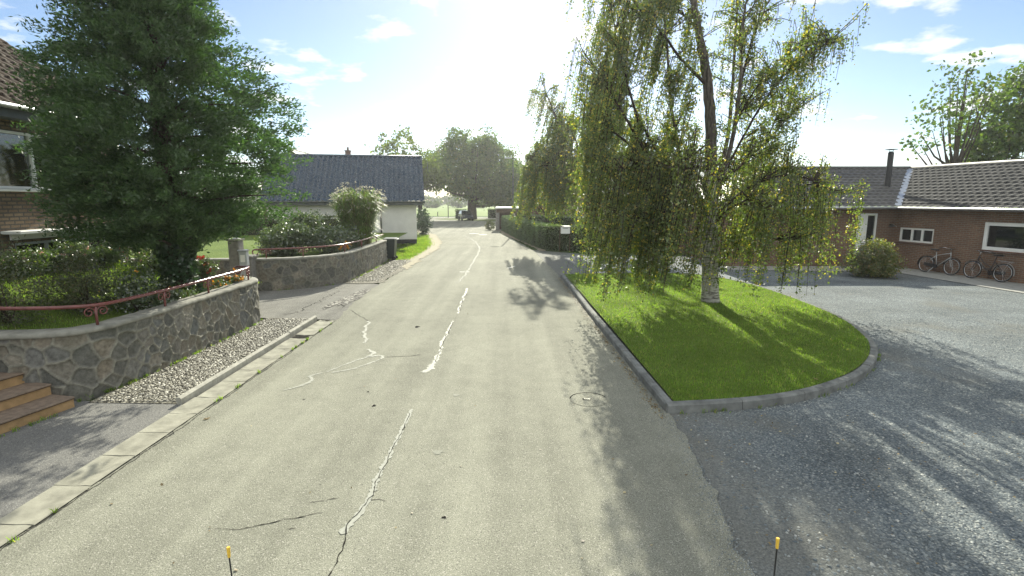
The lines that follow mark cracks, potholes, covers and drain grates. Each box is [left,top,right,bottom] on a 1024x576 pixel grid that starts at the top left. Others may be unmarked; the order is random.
manhole cover [570,392,608,406]
crack [216,497,339,530]
